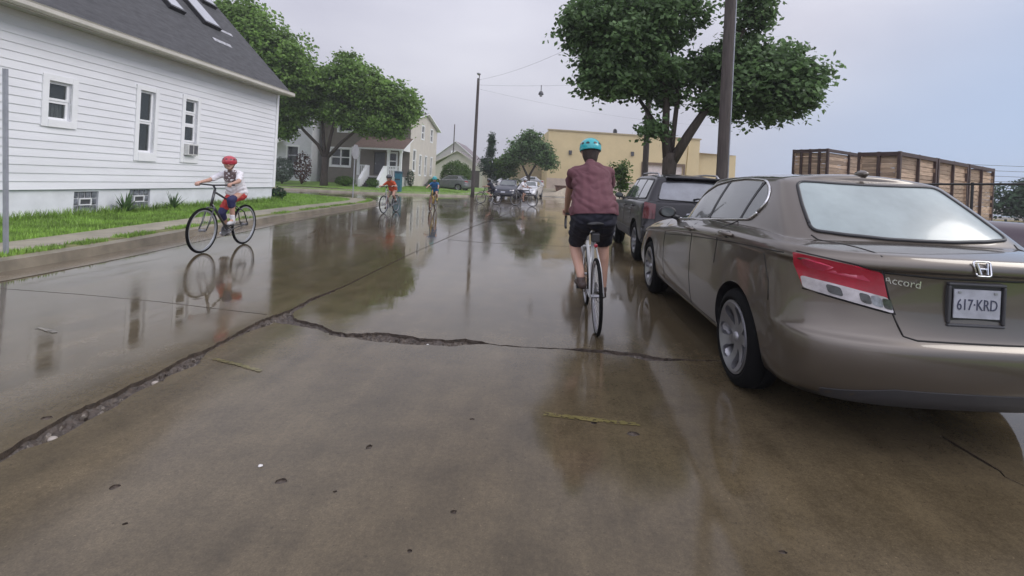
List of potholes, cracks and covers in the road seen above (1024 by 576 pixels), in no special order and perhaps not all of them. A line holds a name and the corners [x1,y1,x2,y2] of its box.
crack [0,207,721,462]
crack [940,436,1024,486]
